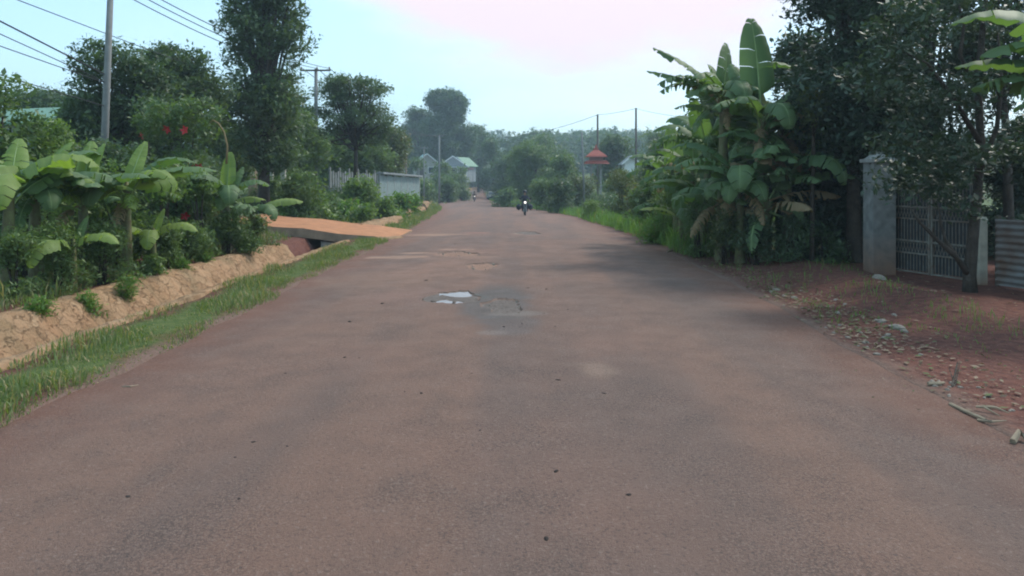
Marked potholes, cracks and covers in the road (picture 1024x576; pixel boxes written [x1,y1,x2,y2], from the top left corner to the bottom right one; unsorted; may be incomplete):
pothole [420,290,481,304]
pothole [466,262,499,270]
pothole [479,298,523,314]
